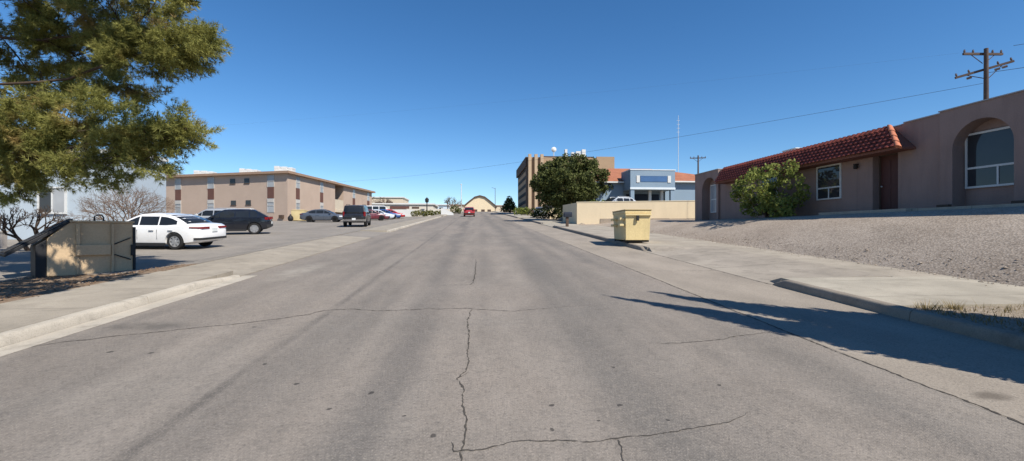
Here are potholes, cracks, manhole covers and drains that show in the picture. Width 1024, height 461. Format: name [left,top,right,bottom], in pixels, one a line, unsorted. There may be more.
crack [32,305,744,461]
